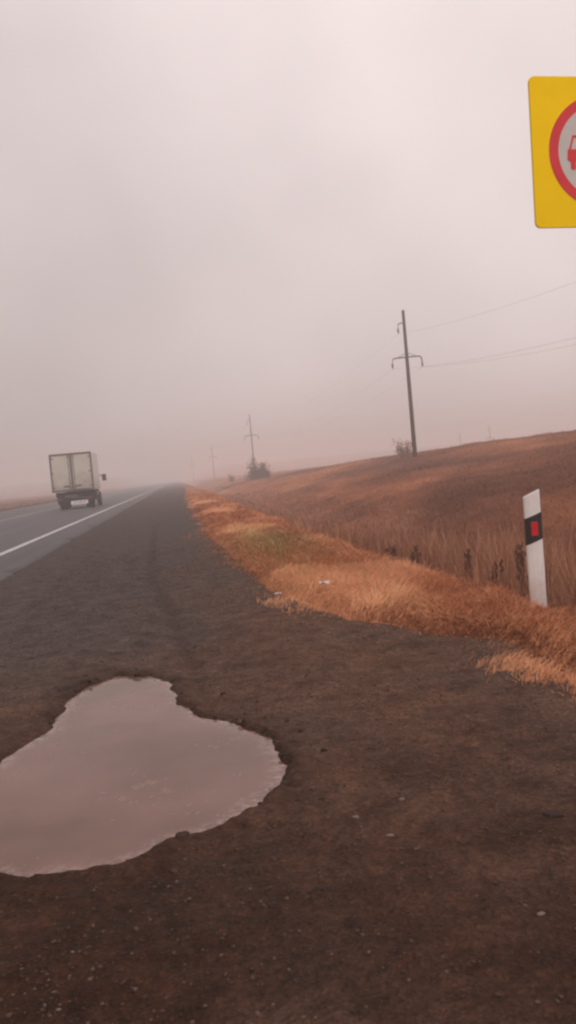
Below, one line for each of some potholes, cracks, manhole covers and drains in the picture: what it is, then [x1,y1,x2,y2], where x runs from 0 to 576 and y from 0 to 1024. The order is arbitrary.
pothole [0,667,320,896]
